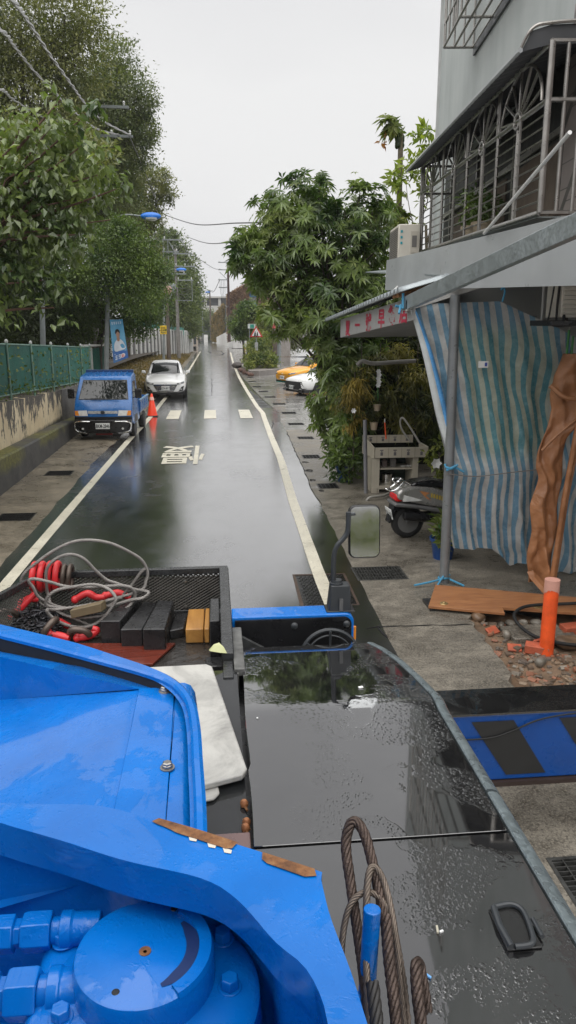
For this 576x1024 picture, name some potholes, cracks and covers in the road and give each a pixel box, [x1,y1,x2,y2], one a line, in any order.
drain grate [0,513,37,521]
drain grate [351,566,409,581]
drain grate [546,856,576,906]
